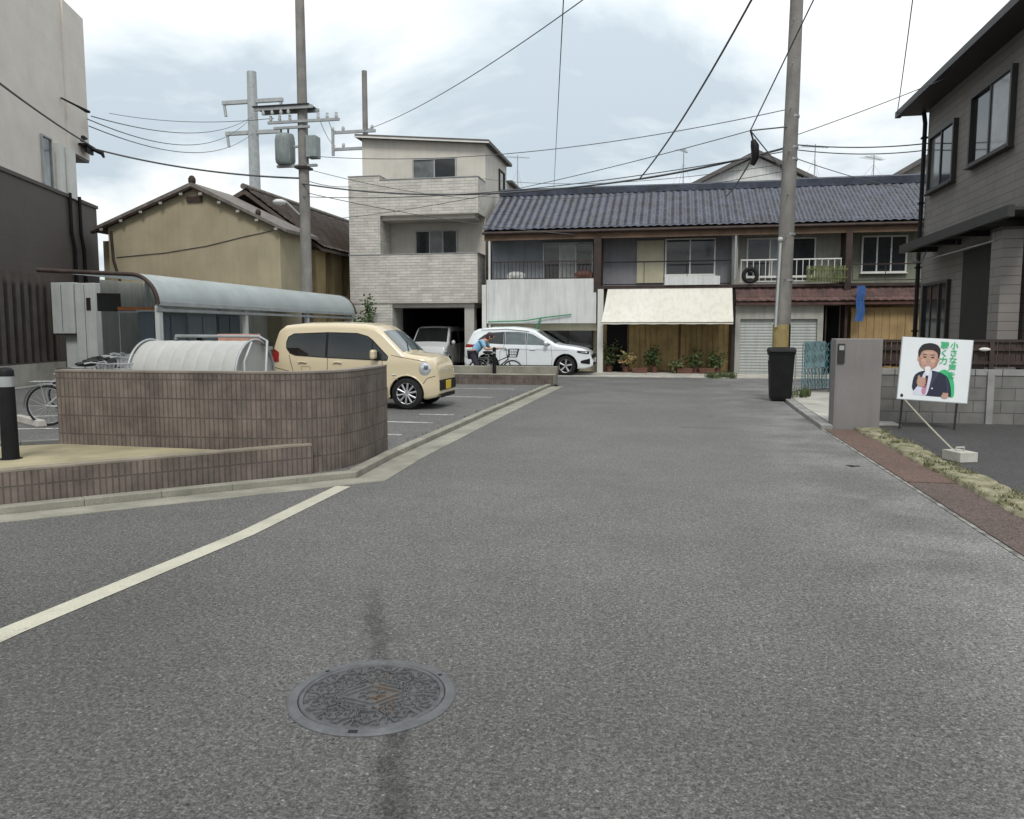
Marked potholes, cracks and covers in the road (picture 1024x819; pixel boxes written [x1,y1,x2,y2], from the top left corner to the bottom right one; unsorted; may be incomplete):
manhole cover [286,660,456,738]
